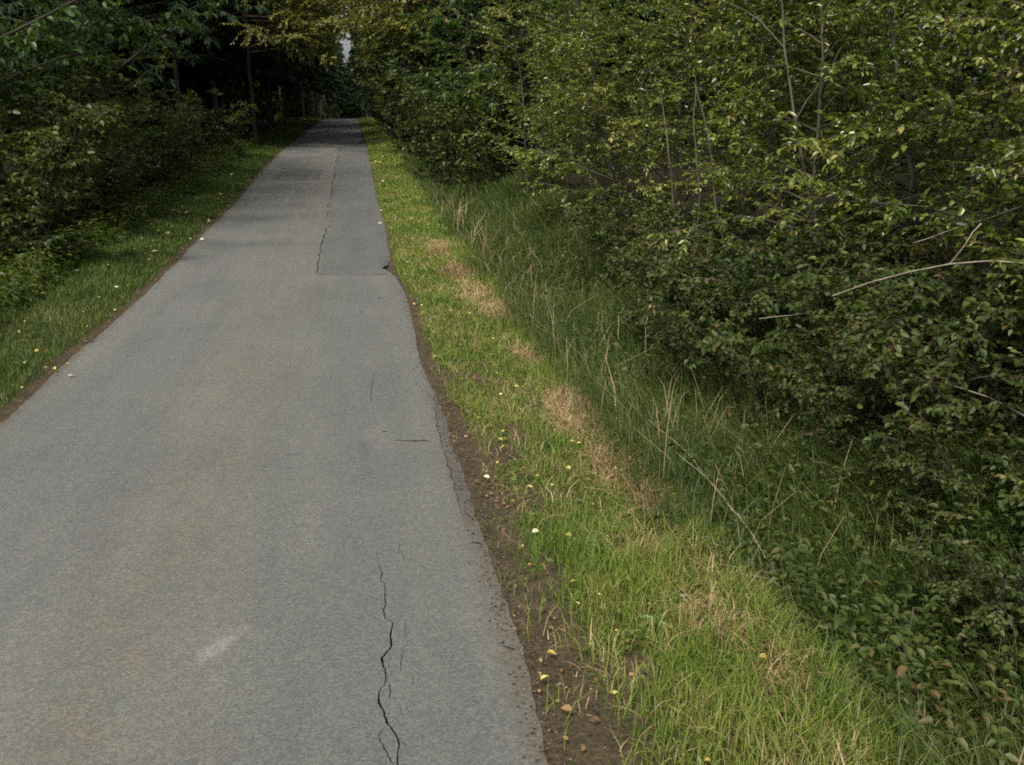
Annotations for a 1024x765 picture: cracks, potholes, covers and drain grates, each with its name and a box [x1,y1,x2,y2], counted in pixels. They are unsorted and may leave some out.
crack [382,410,470,519]
crack [378,542,414,765]
crack [316,148,362,276]
